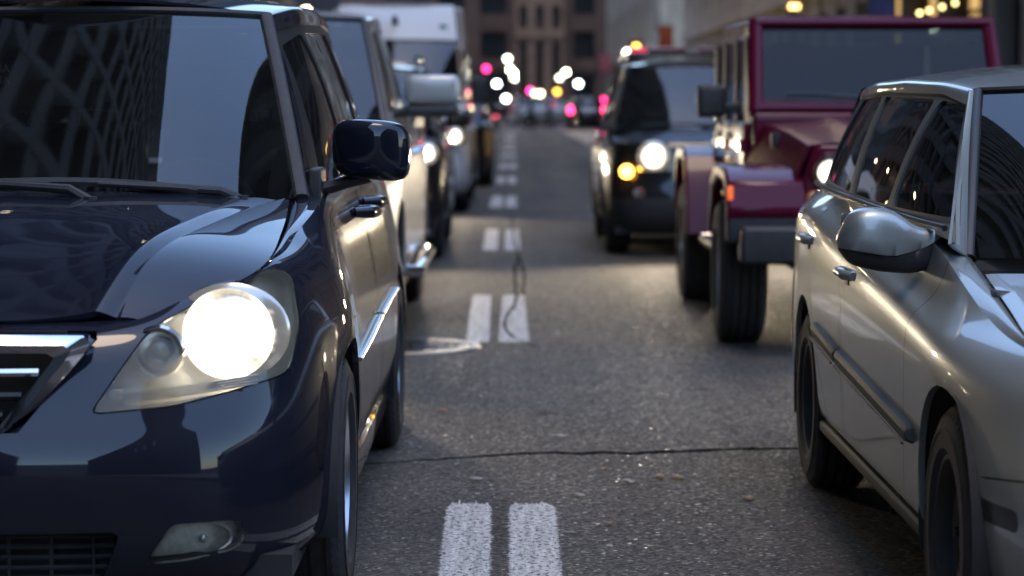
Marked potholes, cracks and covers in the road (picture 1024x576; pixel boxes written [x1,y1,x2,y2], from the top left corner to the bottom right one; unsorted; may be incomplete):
crack [364,447,799,464]
crack [502,210,539,347]
